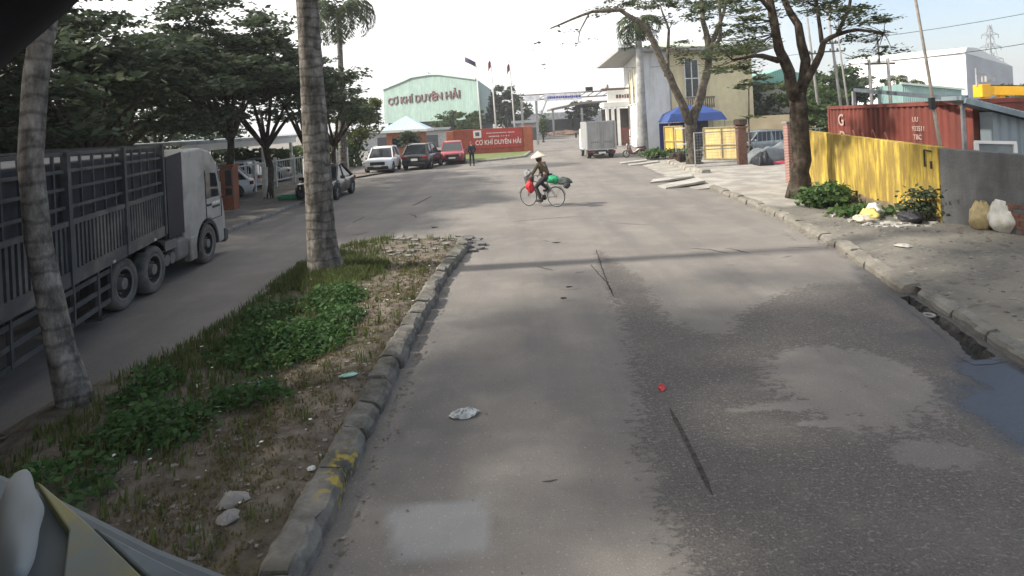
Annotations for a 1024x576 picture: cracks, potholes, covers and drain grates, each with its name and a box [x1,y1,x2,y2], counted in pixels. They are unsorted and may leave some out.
crack [670,408,713,496]
crack [576,250,614,296]
